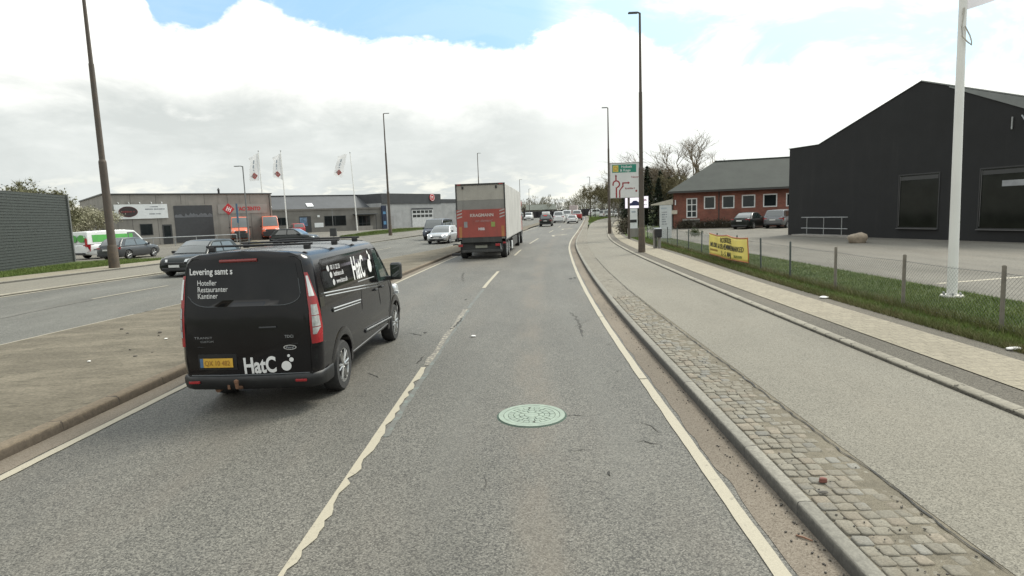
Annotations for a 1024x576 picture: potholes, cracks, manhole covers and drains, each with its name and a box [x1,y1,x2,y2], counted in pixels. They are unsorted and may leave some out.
manhole cover [497,404,567,428]
